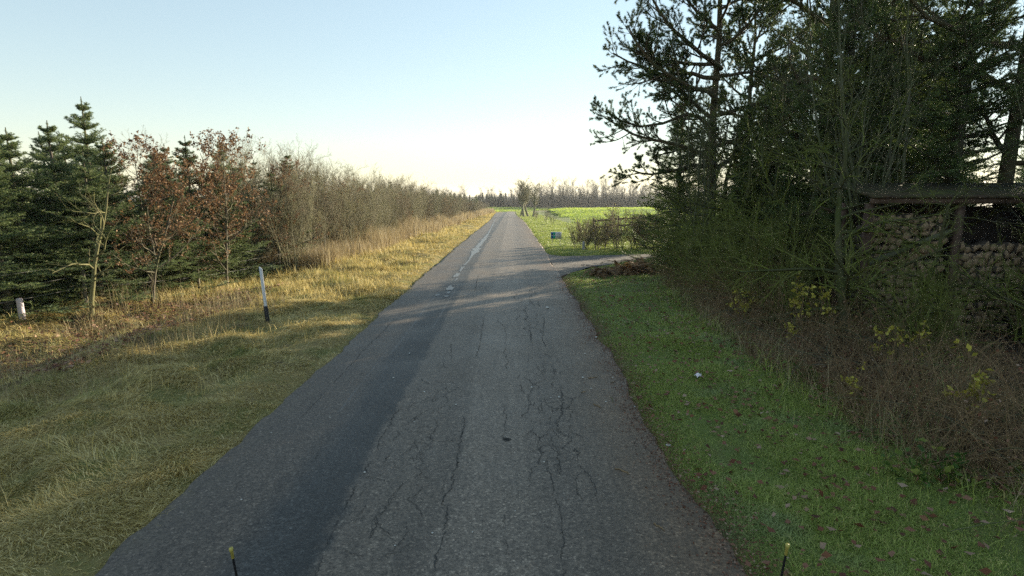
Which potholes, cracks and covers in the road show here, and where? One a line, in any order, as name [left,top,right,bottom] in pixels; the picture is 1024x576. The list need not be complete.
crack [346,358,465,575]
crack [514,288,597,576]
